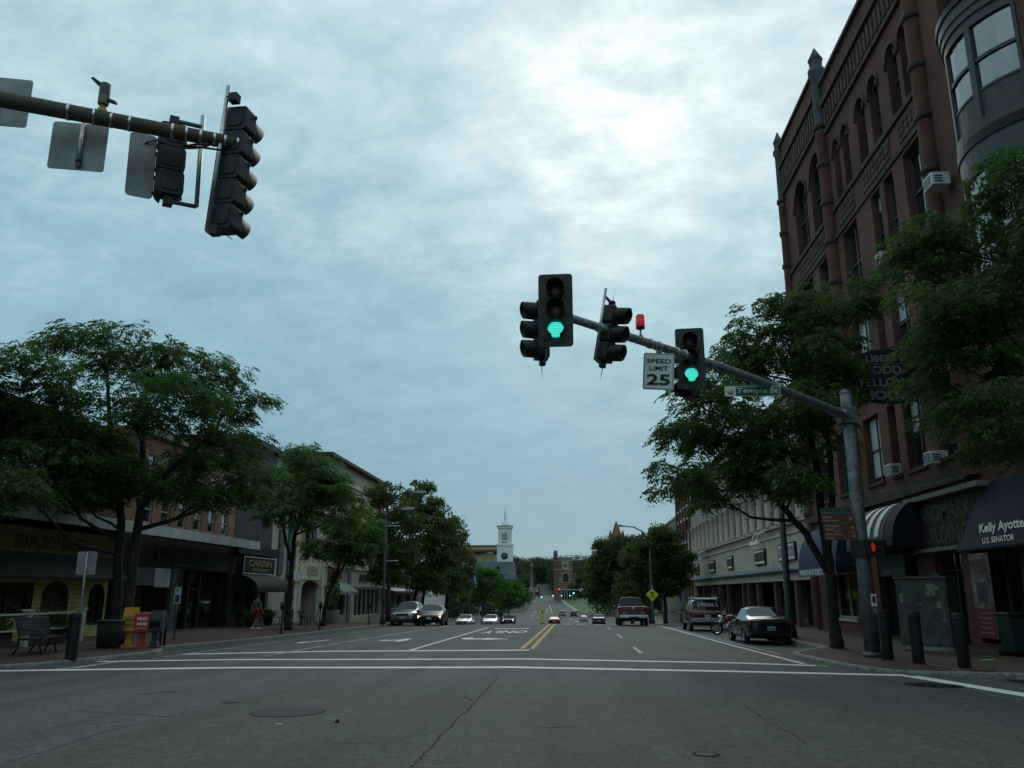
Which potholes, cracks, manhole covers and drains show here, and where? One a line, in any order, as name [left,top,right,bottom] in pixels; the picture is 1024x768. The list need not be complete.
crack [409,678,496,768]
manhole cover [249,707,326,717]
